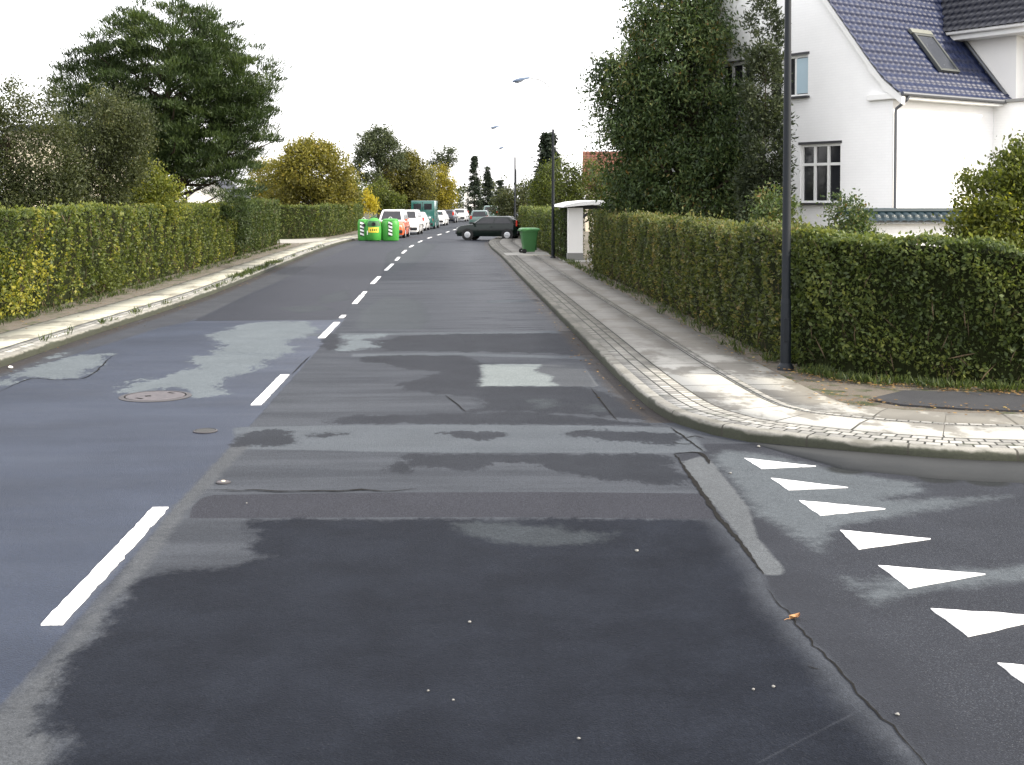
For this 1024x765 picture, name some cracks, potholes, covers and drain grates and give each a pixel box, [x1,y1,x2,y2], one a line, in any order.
crack [771,593,927,765]
crack [671,427,764,573]
manhole cover [119,391,192,402]
